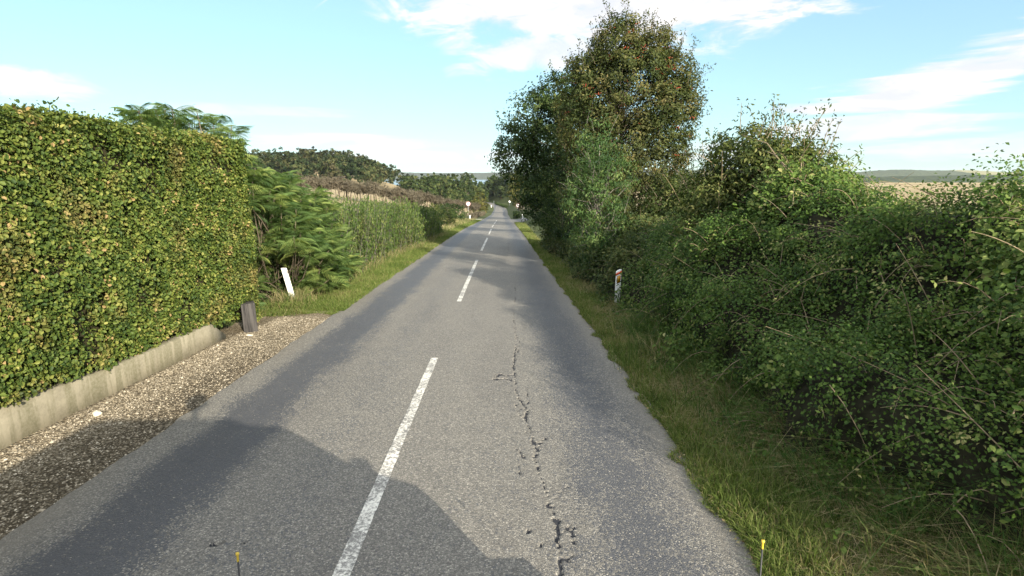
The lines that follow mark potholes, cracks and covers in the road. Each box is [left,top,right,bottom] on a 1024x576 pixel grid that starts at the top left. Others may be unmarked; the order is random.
crack [493,290,575,576]
